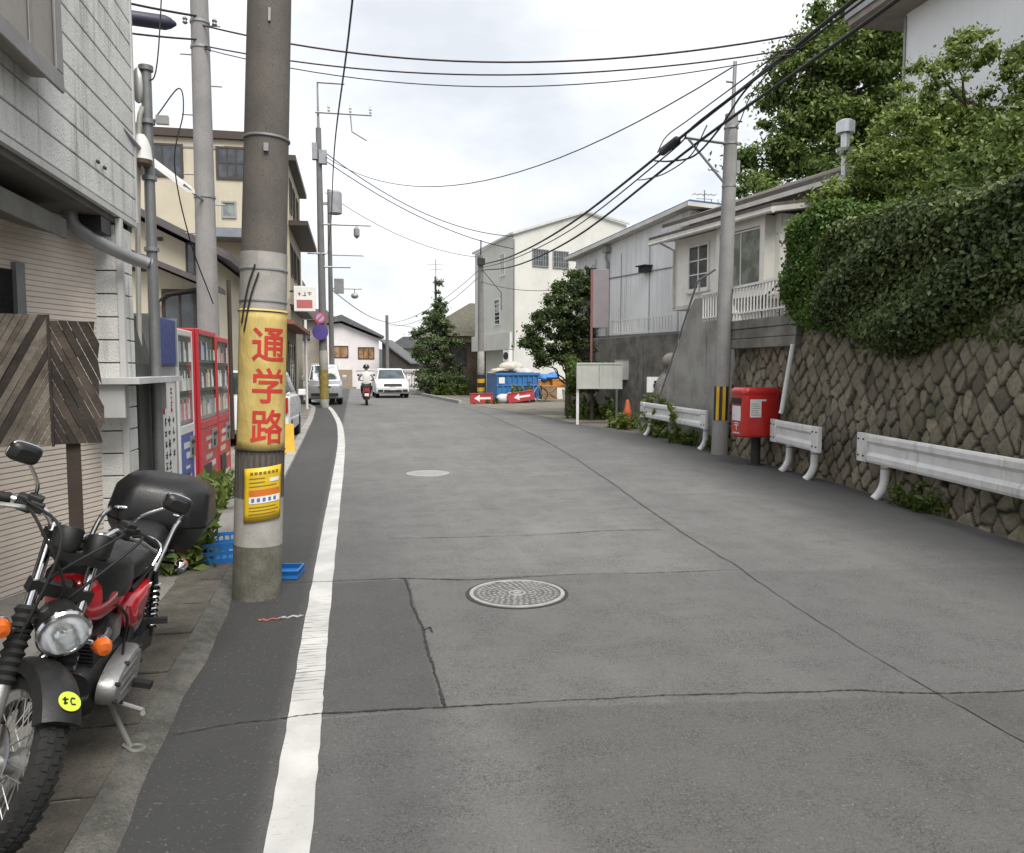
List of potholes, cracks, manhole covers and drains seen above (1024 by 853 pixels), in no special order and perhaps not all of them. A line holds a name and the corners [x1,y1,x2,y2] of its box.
manhole cover [466,579,568,609]
crack [171,569,1024,735]
